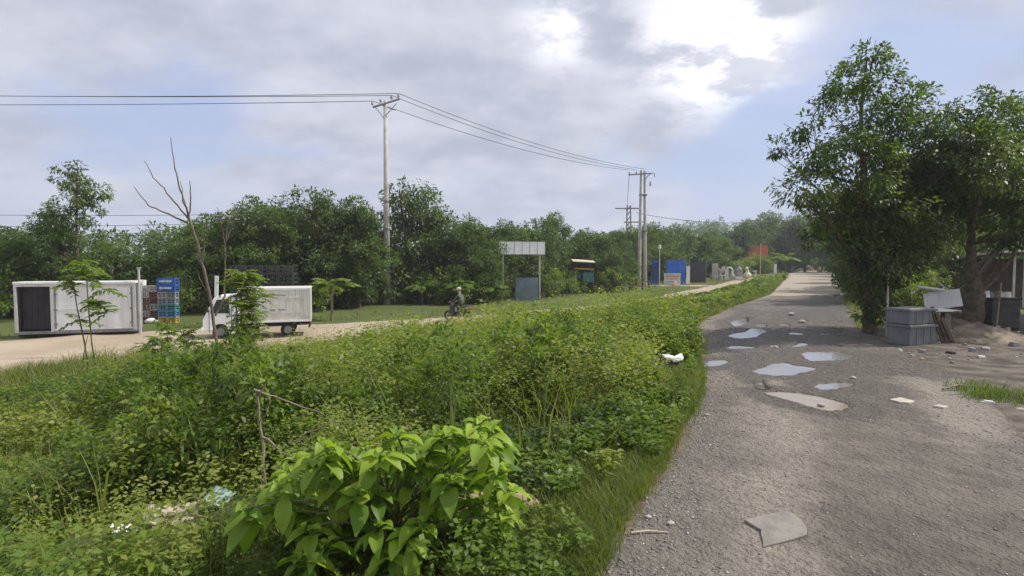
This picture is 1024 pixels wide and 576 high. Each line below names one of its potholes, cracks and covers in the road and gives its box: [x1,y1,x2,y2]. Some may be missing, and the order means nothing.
pothole [701,359,733,368]
pothole [724,317,752,327]
pothole [805,381,861,392]
pothole [724,328,770,339]
pothole [751,389,863,414]
pothole [796,351,858,362]
pothole [747,362,823,377]
